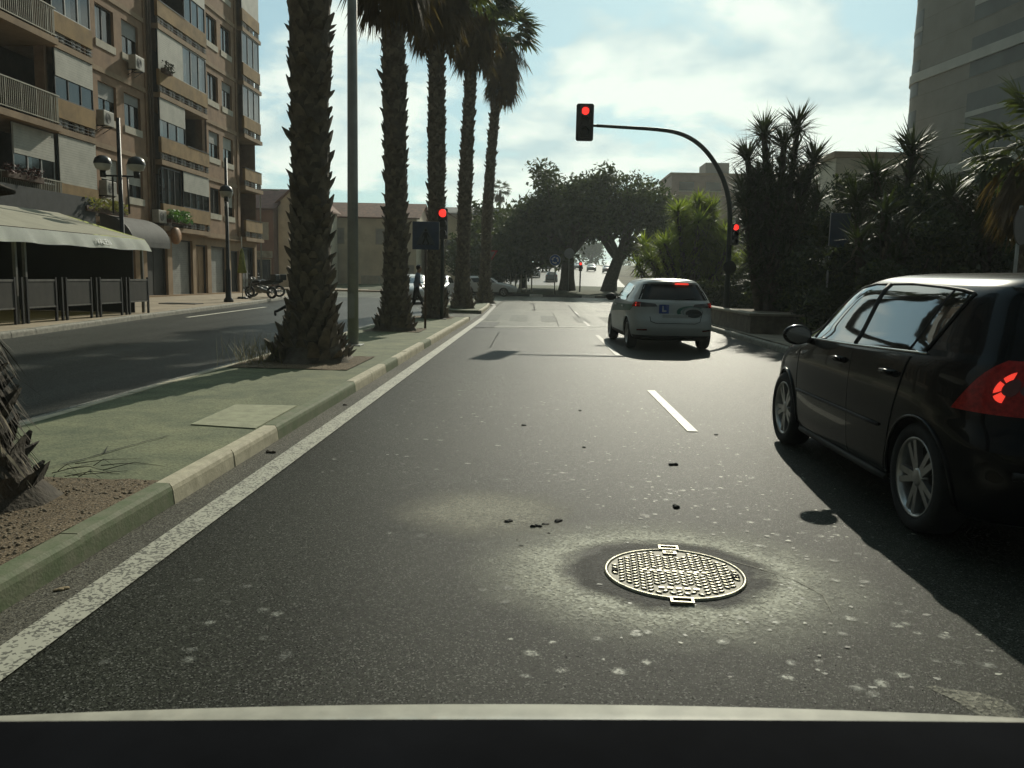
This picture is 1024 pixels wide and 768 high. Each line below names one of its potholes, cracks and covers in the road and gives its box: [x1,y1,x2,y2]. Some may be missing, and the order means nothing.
manhole cover [604,545,747,606]
crack [732,560,833,614]
